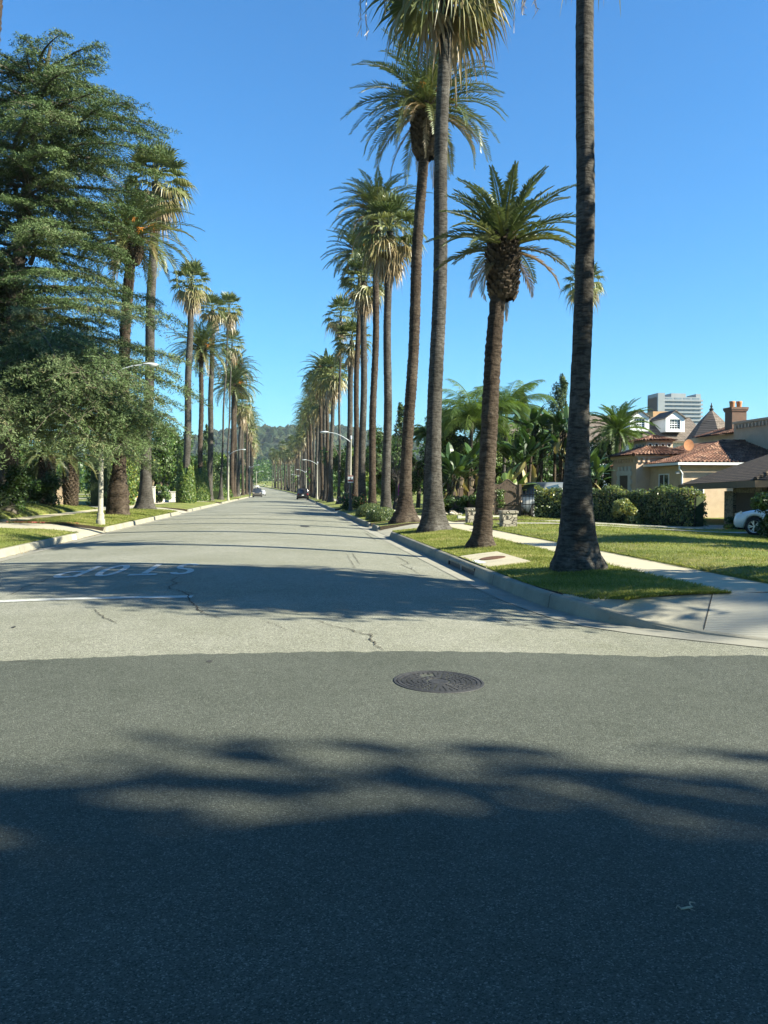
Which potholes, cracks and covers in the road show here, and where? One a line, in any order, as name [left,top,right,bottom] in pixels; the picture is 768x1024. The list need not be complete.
crack [169,576,226,620]
manhole cover [393,671,484,693]
